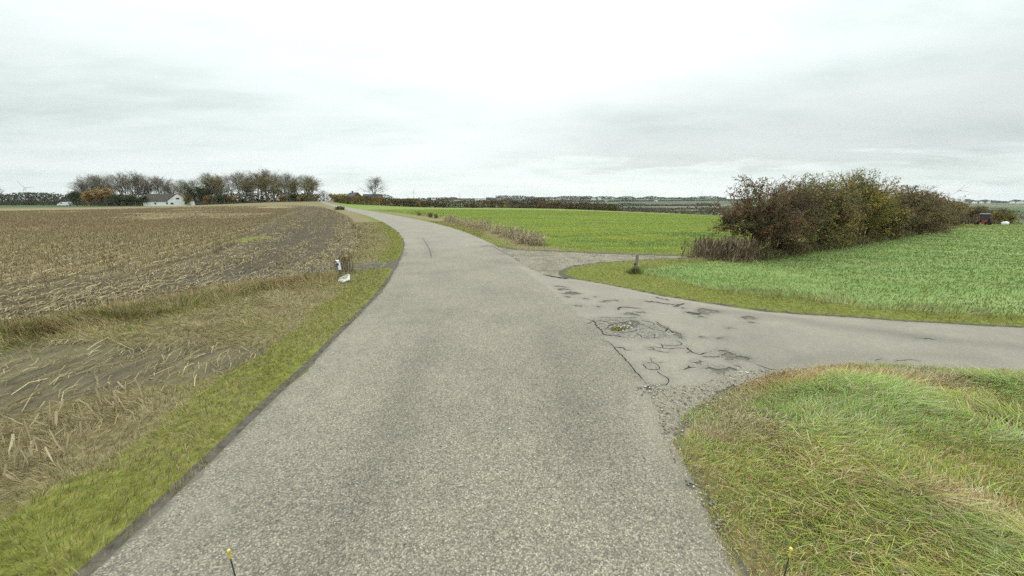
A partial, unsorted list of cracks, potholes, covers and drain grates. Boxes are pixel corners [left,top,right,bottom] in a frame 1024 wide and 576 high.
crack [588,297,774,385]
pothole [607,320,640,331]
